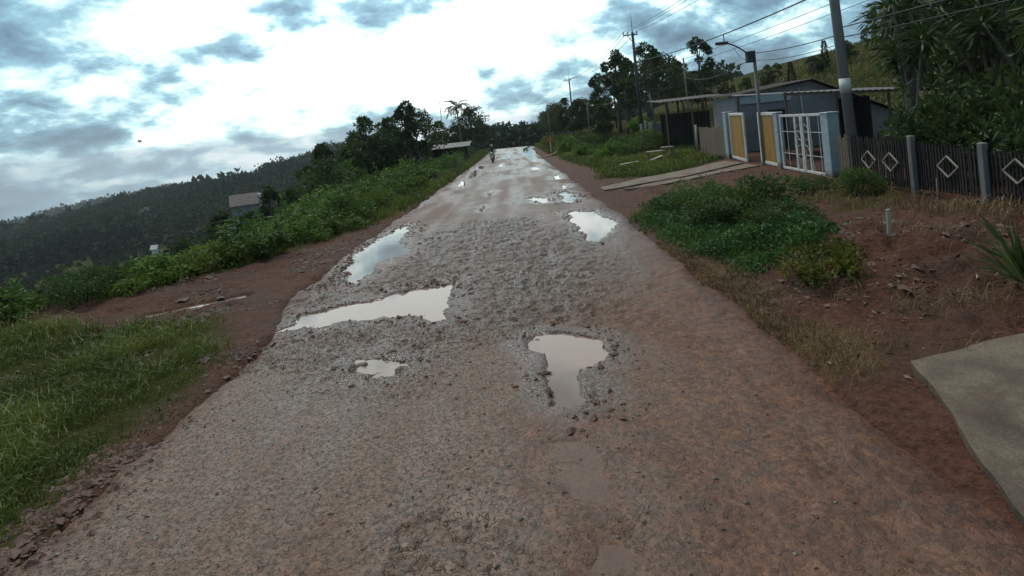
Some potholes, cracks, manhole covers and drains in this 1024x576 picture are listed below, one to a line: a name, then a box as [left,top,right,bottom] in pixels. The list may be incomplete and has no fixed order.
pothole [524,196,553,204]
pothole [275,280,463,333]
pothole [335,222,418,288]
pothole [556,190,580,204]
pothole [564,209,621,244]
pothole [518,329,616,411]
pothole [344,352,415,382]
